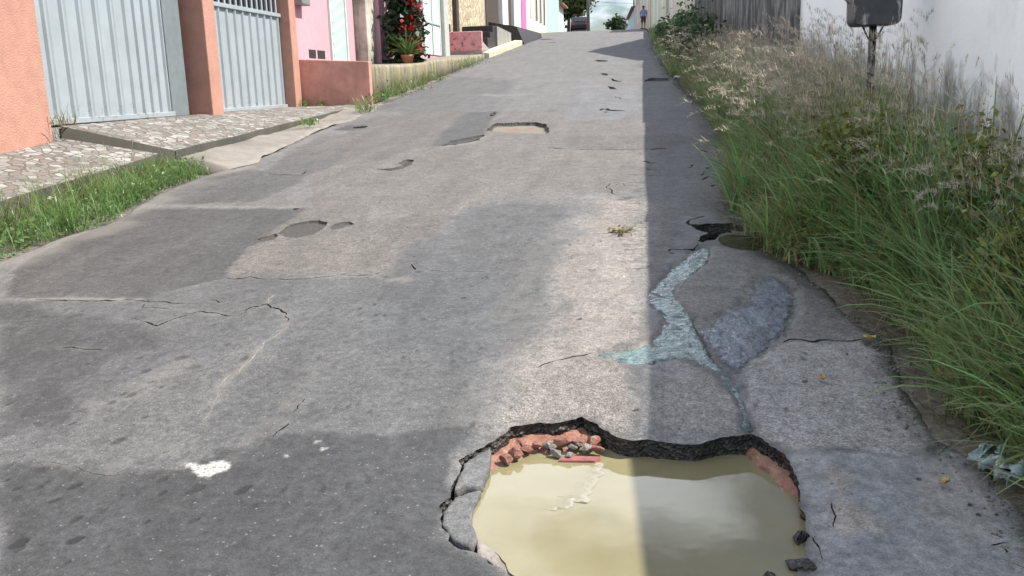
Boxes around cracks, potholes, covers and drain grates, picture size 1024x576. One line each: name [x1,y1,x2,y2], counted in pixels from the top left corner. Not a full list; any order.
pothole [439,417,810,554]
pothole [330,222,353,230]
pothole [278,220,327,238]
pothole [486,122,550,134]
crack [133,272,383,419]
pothole [690,223,750,242]
pothole [378,159,414,171]
